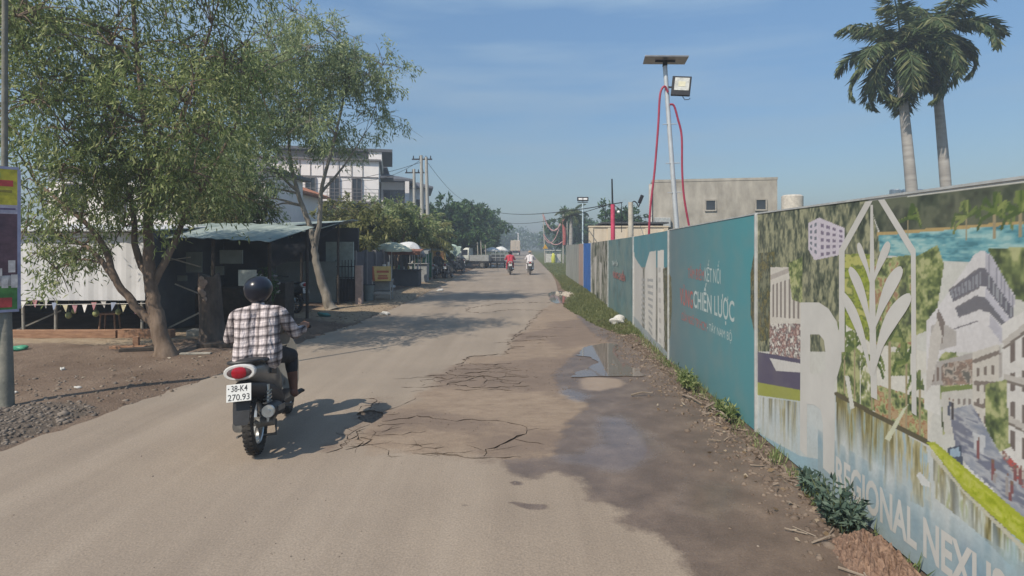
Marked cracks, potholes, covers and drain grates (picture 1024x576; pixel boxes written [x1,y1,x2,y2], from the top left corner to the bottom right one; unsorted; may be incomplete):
crack [404,302,556,391]
crack [336,398,541,458]
pothole [357,410,383,423]
